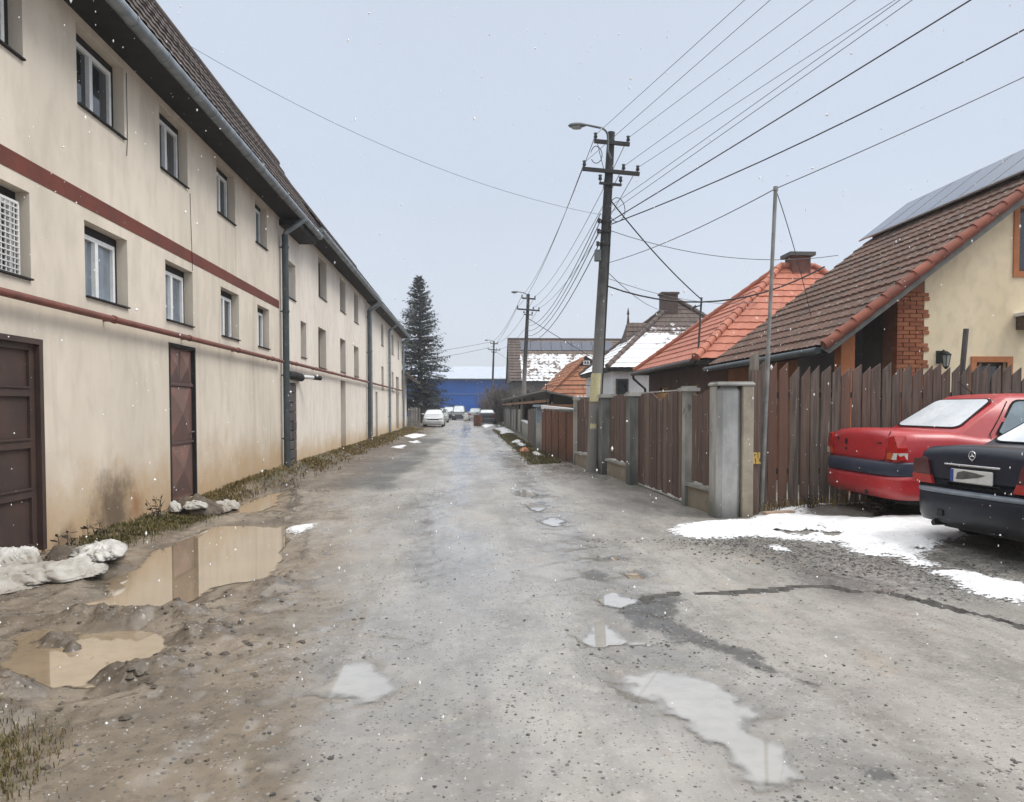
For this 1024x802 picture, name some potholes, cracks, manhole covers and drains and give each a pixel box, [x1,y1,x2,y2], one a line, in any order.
pothole [0,603,190,699]
pothole [588,587,643,610]
pothole [617,566,654,579]
pothole [42,521,301,611]
pothole [520,500,558,512]
pothole [535,516,570,527]
pothole [509,488,544,498]
